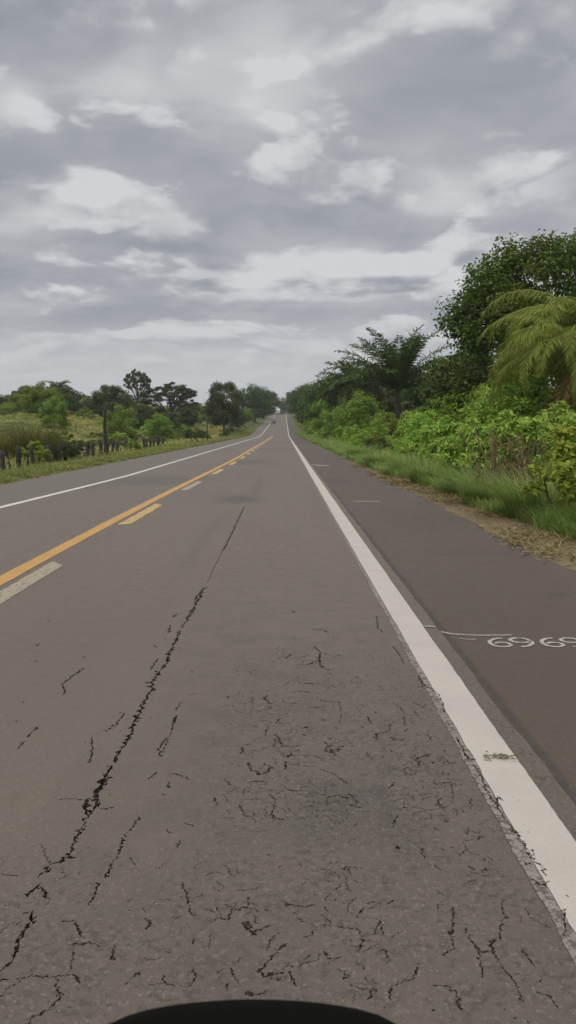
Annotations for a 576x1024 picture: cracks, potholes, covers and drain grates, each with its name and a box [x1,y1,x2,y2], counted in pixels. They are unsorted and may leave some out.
crack [0,507,245,1024]
crack [381,702,558,1024]
